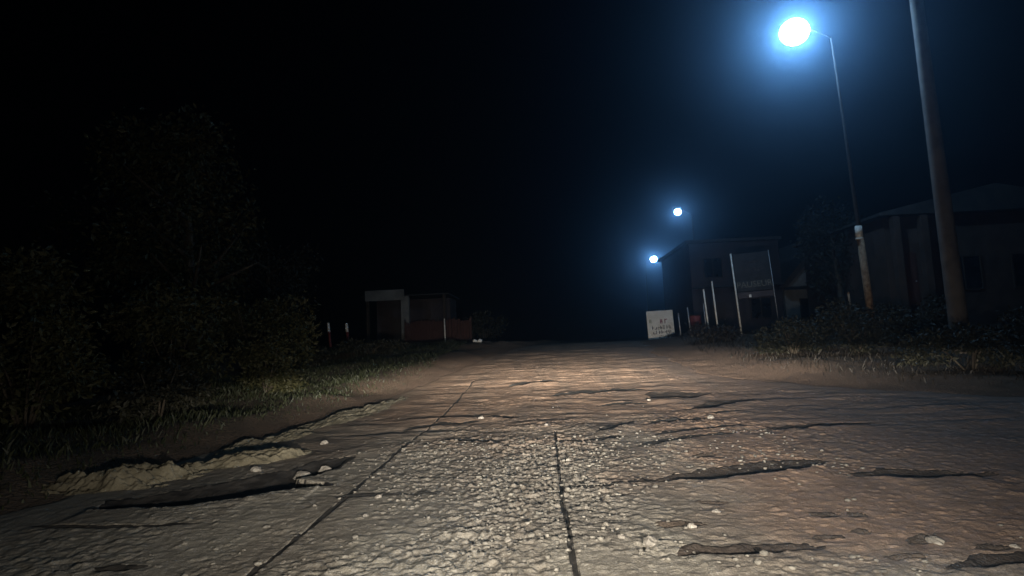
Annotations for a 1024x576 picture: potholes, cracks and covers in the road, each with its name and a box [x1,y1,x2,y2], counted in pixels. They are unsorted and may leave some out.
pothole [92,456,356,510]
crack [509,380,751,446]
